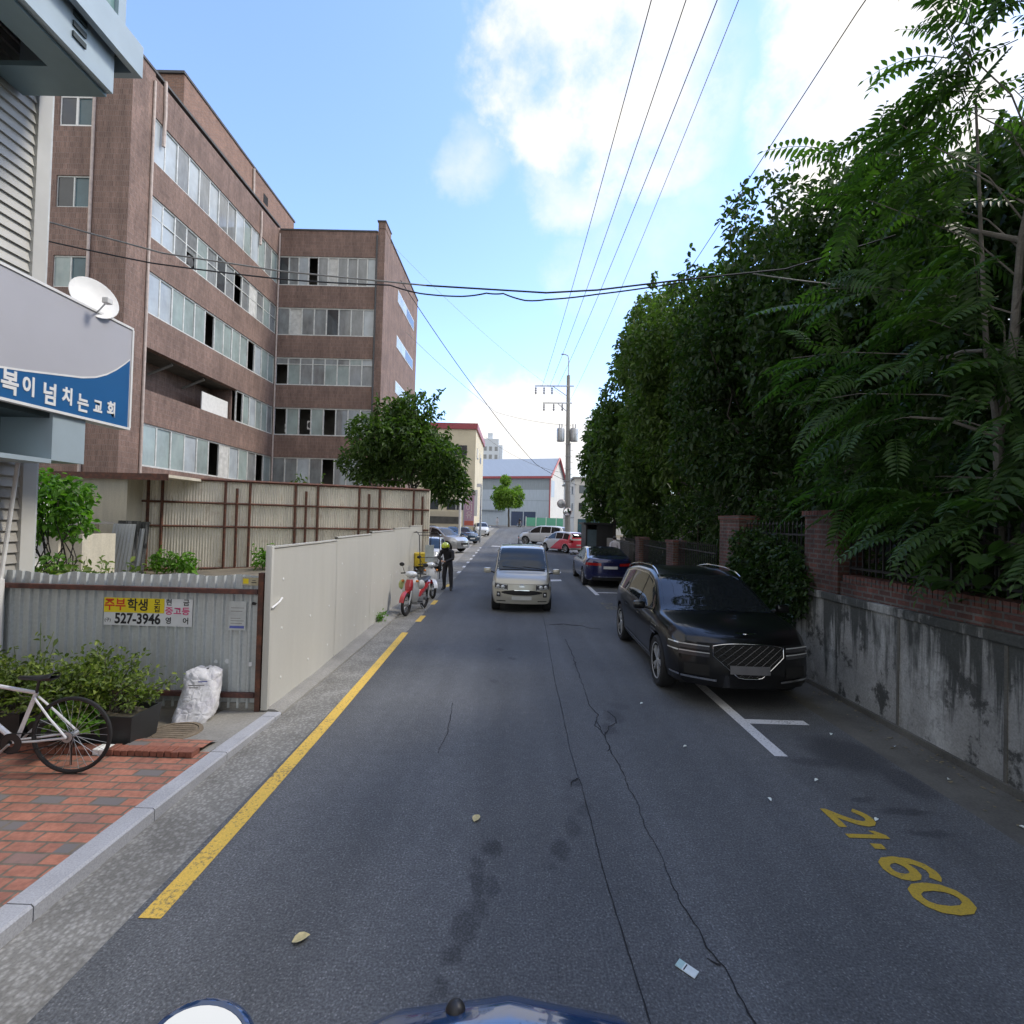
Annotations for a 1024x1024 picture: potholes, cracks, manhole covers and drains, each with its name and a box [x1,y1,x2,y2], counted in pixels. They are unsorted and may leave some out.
manhole cover [148,722,204,739]
crack [549,624,757,1024]
